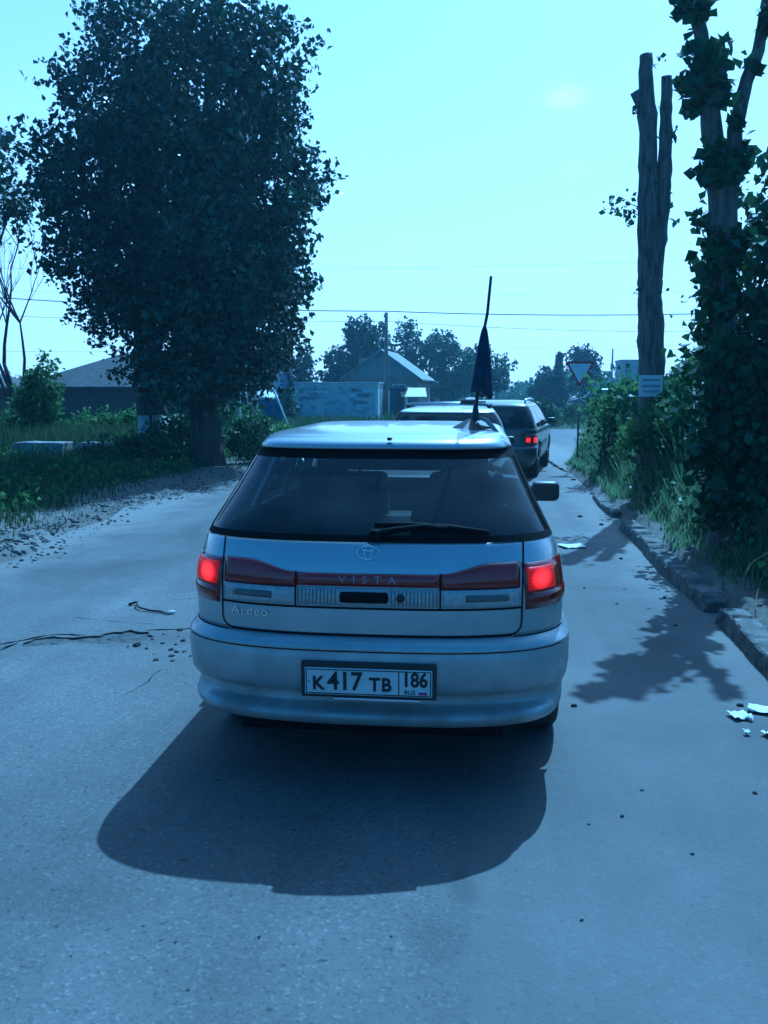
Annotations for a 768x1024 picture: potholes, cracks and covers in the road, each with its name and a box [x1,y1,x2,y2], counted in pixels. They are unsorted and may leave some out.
crack [0,617,190,650]
